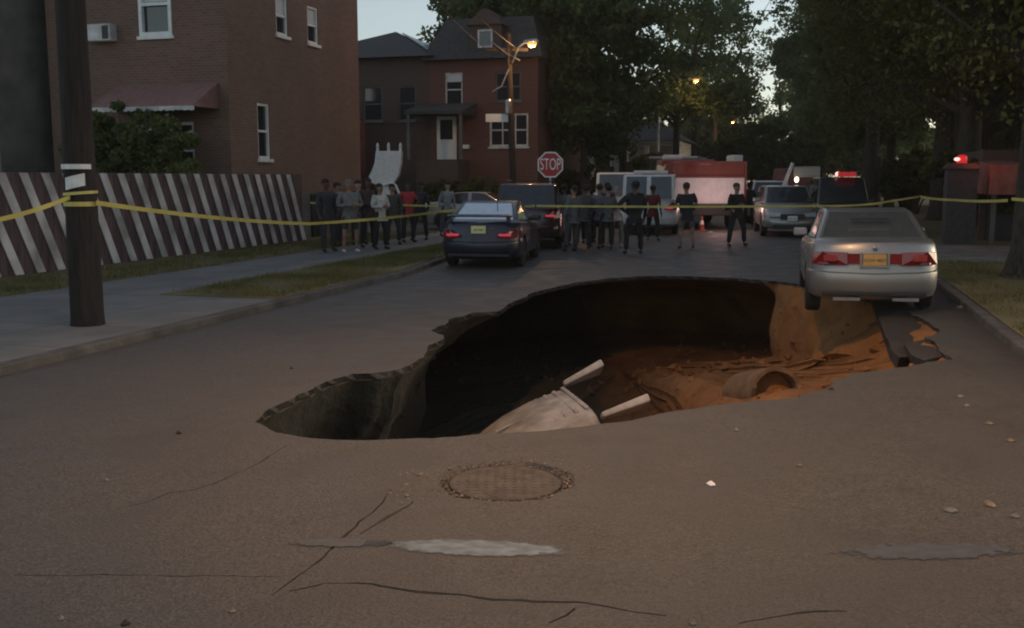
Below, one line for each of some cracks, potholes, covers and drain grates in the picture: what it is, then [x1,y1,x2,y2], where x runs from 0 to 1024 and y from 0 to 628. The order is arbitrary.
crack [359,501,413,534]
crack [26,574,667,623]
manhole cover [437,460,576,502]
crack [739,610,846,624]
crack [117,445,287,509]
